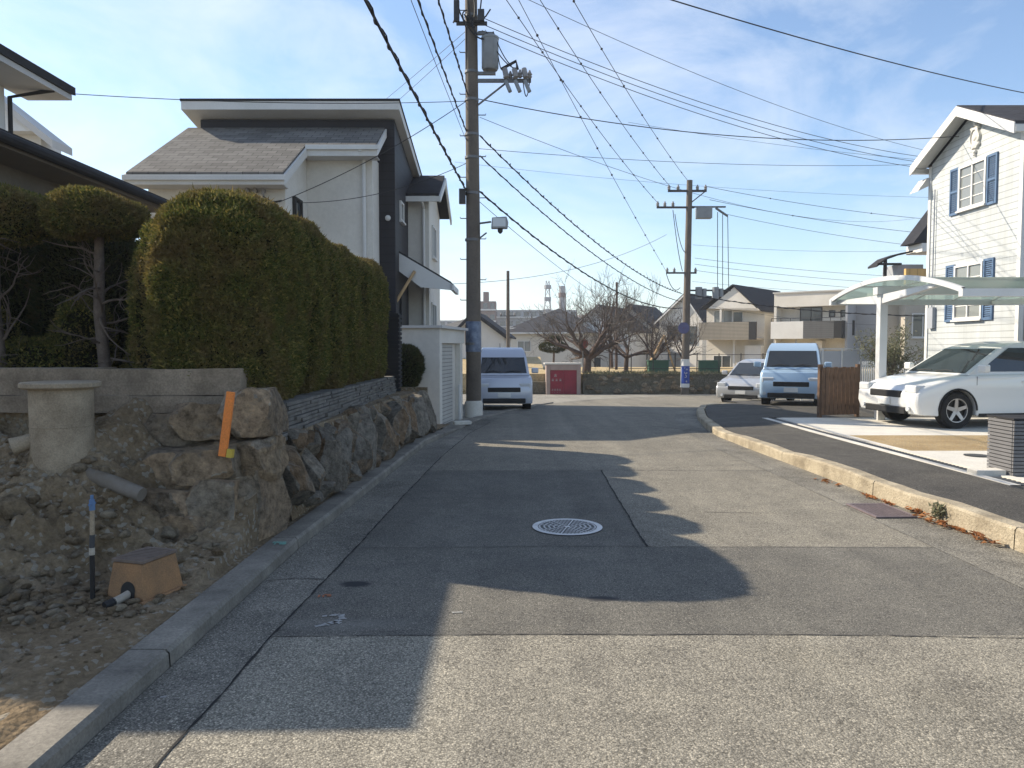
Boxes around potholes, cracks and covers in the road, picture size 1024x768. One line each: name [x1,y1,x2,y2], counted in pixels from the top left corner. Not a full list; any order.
manhole cover [532,518,603,536]
